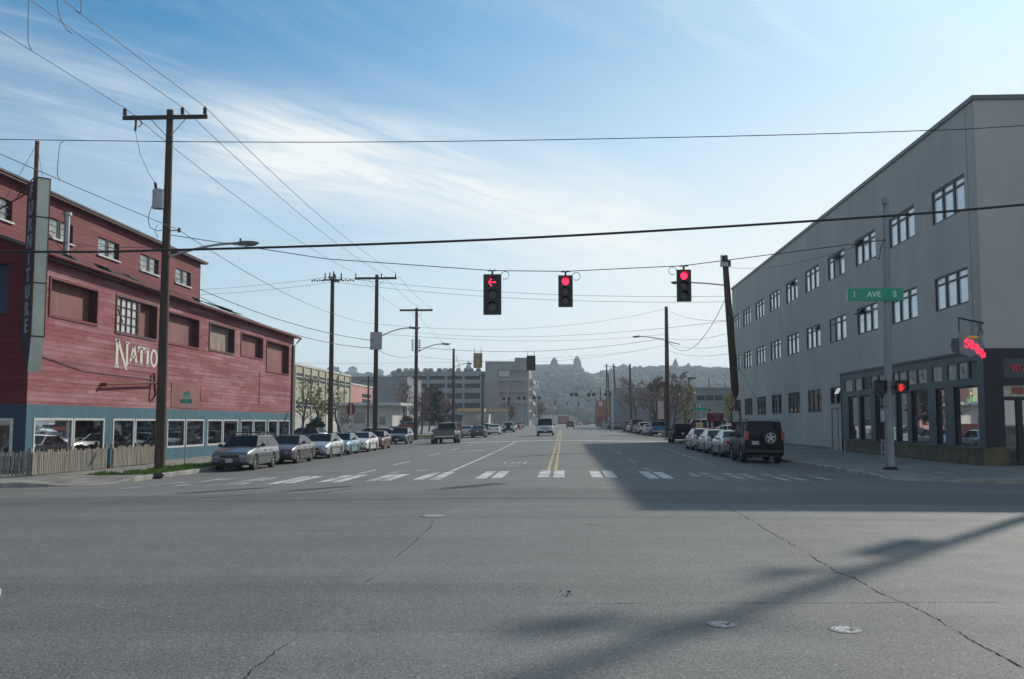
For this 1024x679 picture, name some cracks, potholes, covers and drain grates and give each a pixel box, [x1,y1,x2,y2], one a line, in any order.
crack [724,506,1024,668]
manhole cover [705,620,737,628]
manhole cover [827,625,862,634]
